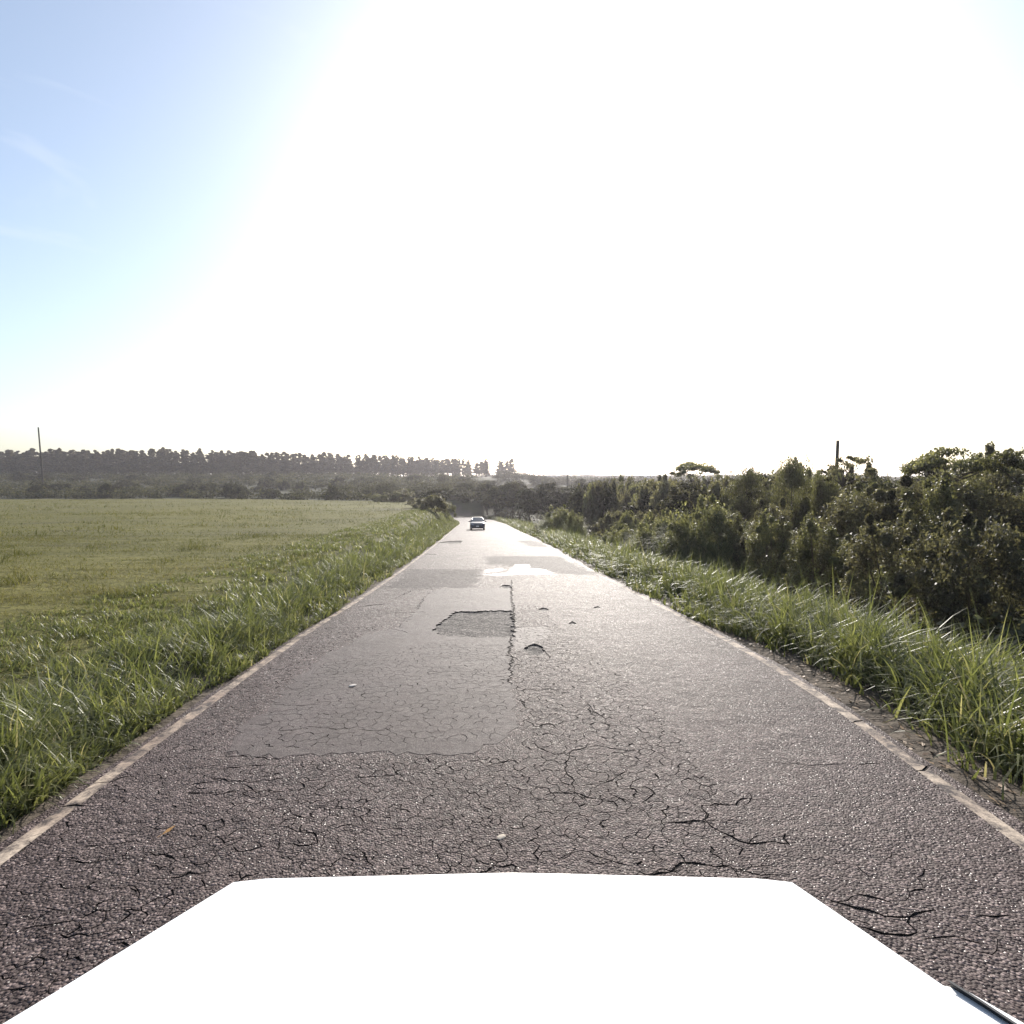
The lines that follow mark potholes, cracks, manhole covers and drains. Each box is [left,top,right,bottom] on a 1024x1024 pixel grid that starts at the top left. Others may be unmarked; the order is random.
crack [0,581,1009,1013]
pothole [432,610,516,638]
pothole [524,644,546,655]
